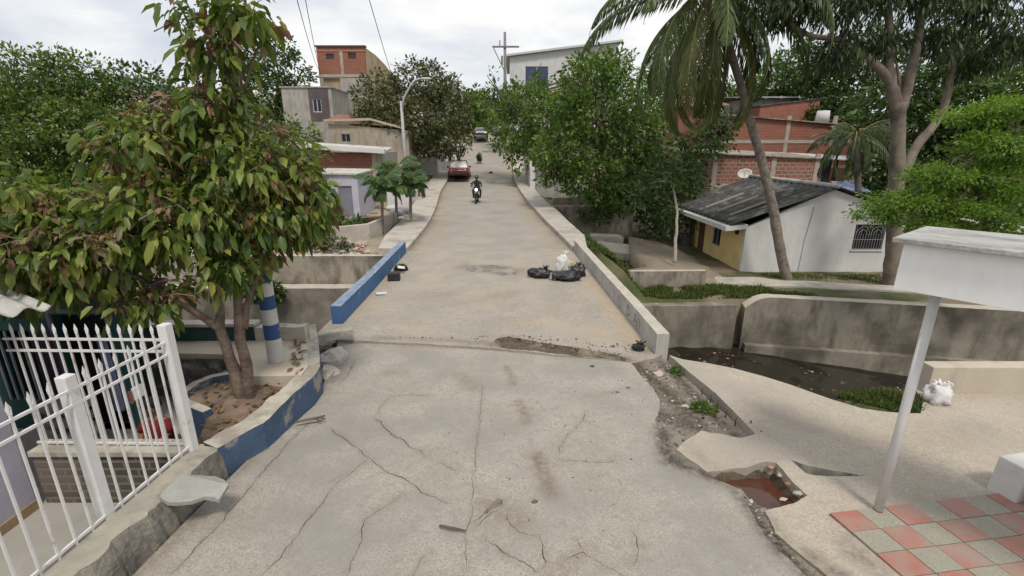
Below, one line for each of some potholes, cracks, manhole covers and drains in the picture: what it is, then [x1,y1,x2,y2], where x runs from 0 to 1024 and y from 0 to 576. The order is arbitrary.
crack [263,394,455,574]
crack [566,534,639,575]
pothole [713,470,800,509]
pothole [491,337,633,362]
crack [474,506,546,573]
